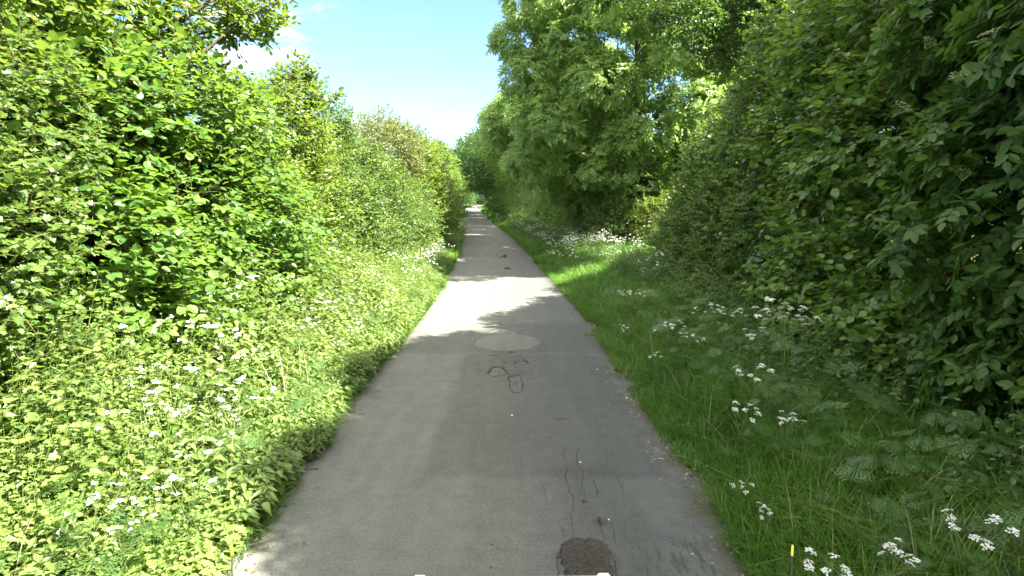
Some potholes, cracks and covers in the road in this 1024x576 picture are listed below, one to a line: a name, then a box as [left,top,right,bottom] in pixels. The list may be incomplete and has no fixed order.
crack [560,444,624,534]
